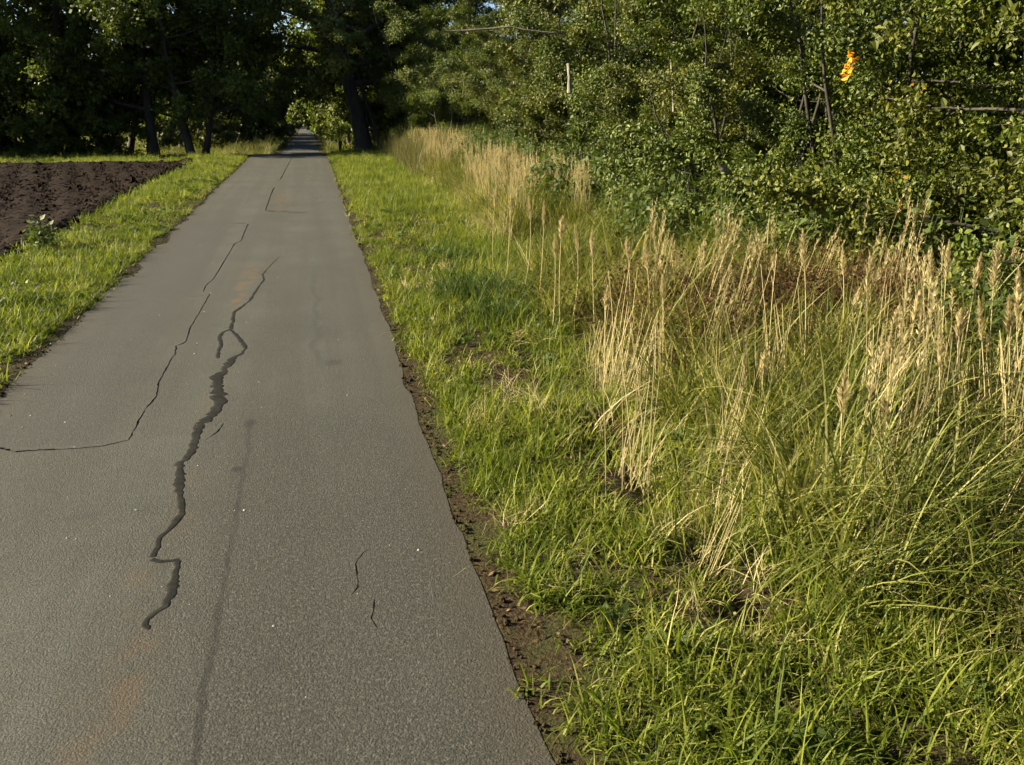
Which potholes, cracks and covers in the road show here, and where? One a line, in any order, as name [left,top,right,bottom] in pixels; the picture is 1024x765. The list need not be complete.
crack [0,158,304,452]
